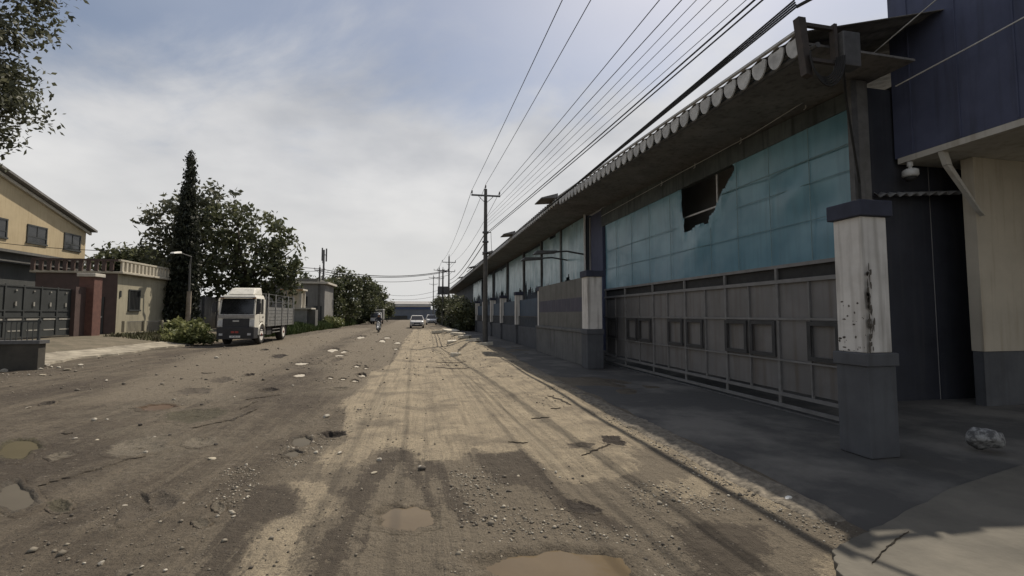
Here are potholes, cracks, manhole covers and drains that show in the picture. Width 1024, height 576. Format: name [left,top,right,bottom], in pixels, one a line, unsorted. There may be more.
crack [193,394,282,428]
pothole [597,434,630,448]
pothole [0,436,52,465]
pothole [0,474,47,519]
pothole [44,497,76,515]
pothole [315,430,350,440]
pothole [286,433,318,450]
crack [872,531,909,563]
pothole [360,499,452,536]
